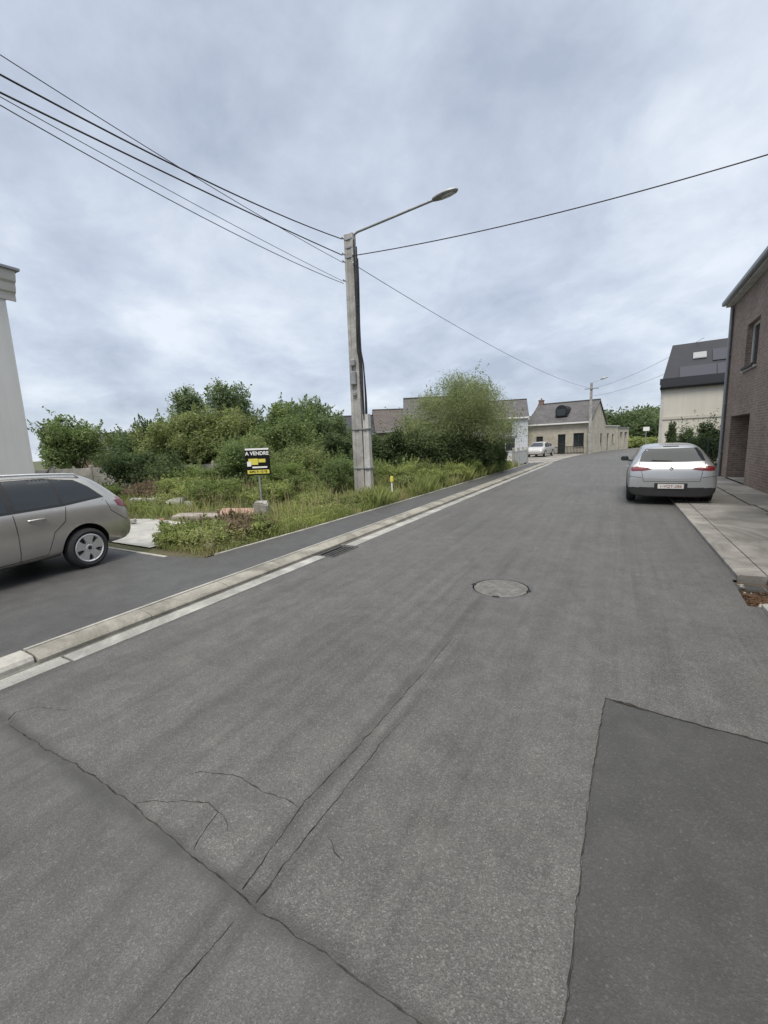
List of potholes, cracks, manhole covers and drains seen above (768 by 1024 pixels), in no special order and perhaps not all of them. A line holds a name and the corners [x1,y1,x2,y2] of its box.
drain grate [314,545,357,558]
manhole cover [469,578,534,599]
crack [139,641,450,903]
